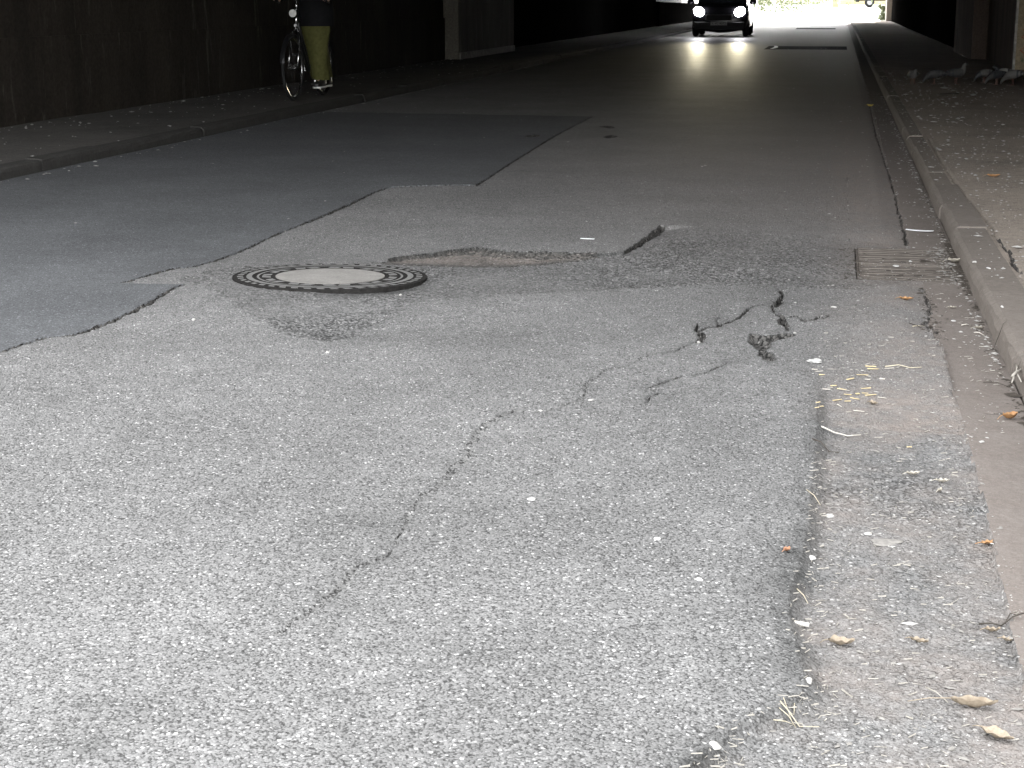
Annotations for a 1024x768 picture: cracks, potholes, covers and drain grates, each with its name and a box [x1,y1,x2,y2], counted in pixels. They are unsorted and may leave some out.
drain grate [854,248,956,266]
pothole [378,247,599,268]
drain grate [855,263,963,283]
manhole cover [232,264,427,294]
crack [275,354,652,635]
crack [679,306,753,350]
crack [771,291,829,331]
